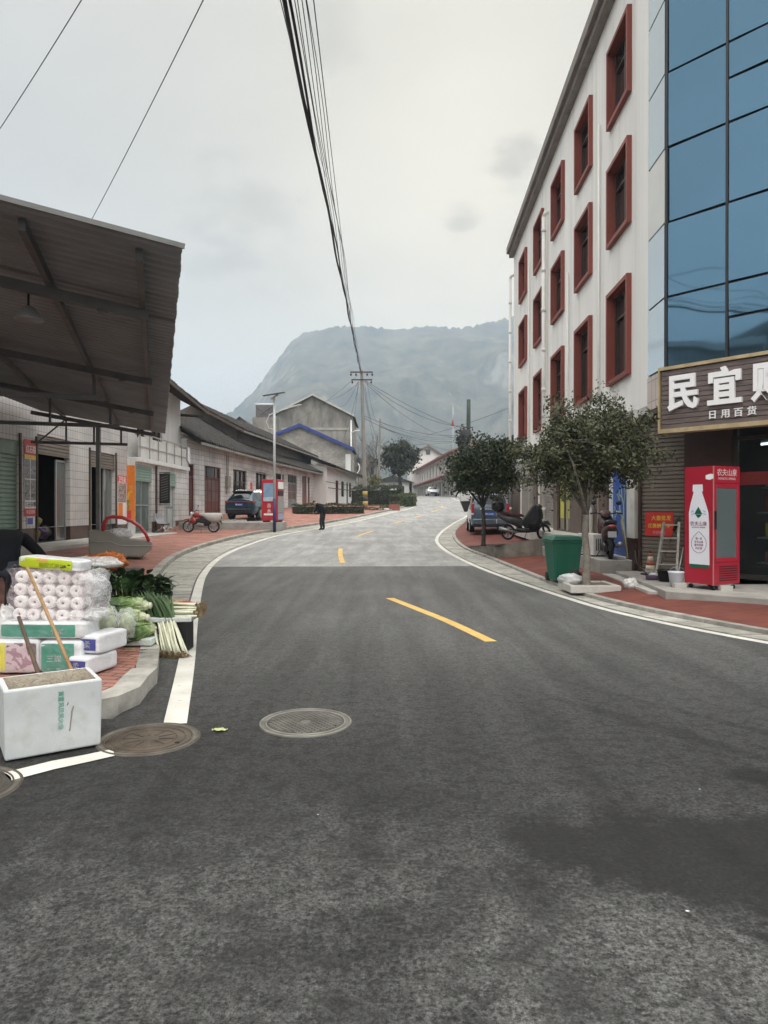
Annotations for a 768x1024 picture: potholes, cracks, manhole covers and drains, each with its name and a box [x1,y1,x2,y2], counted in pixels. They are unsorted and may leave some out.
manhole cover [96,722,201,757]
manhole cover [259,708,352,738]
manhole cover [0,766,24,799]
